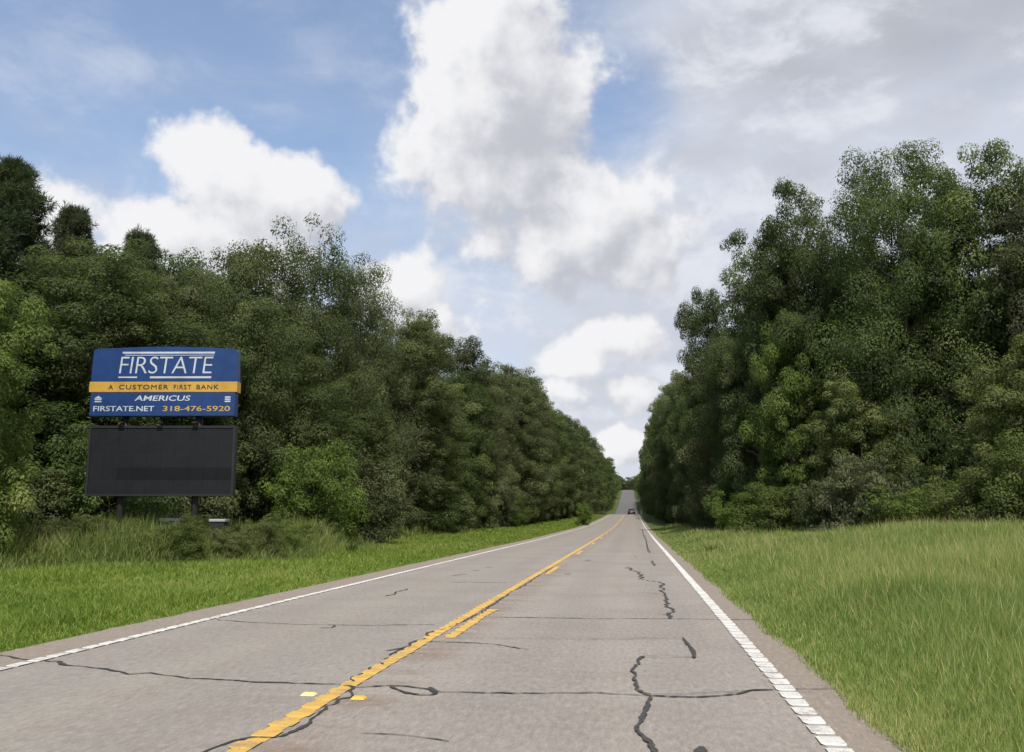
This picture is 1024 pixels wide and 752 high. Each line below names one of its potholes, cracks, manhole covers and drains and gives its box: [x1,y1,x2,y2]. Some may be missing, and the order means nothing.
crack [218,619,524,649]
crack [533,531,758,620]
